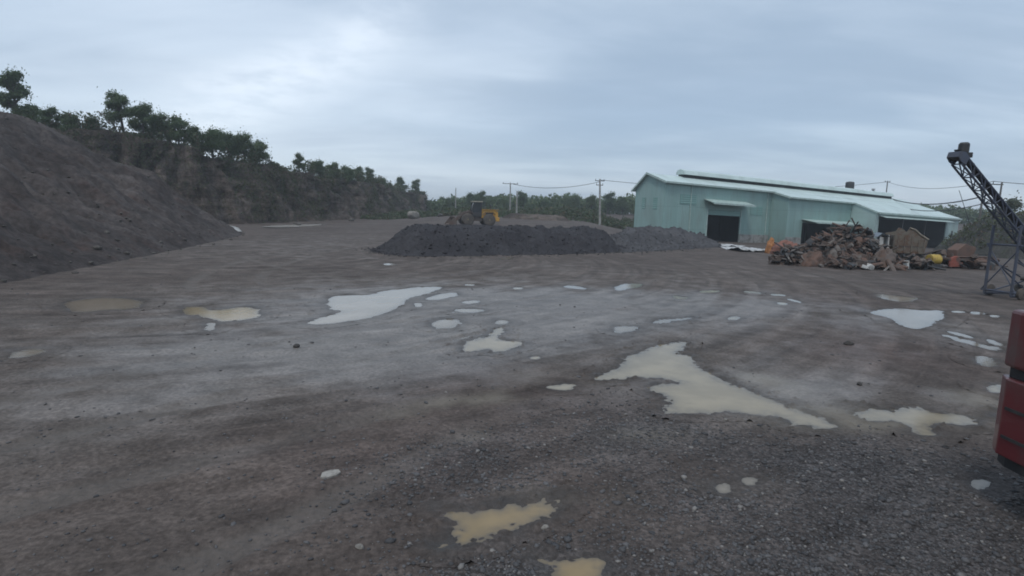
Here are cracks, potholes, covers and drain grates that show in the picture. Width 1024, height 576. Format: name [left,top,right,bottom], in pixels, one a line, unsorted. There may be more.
pothole [825,397,998,447]
pothole [158,302,281,324]
pothole [509,540,634,576]
pothole [402,479,595,568]
pothole [285,284,459,329]
pothole [39,294,165,316]
pothole [573,338,872,441]
pothole [848,305,969,332]
pothole [440,325,542,357]
